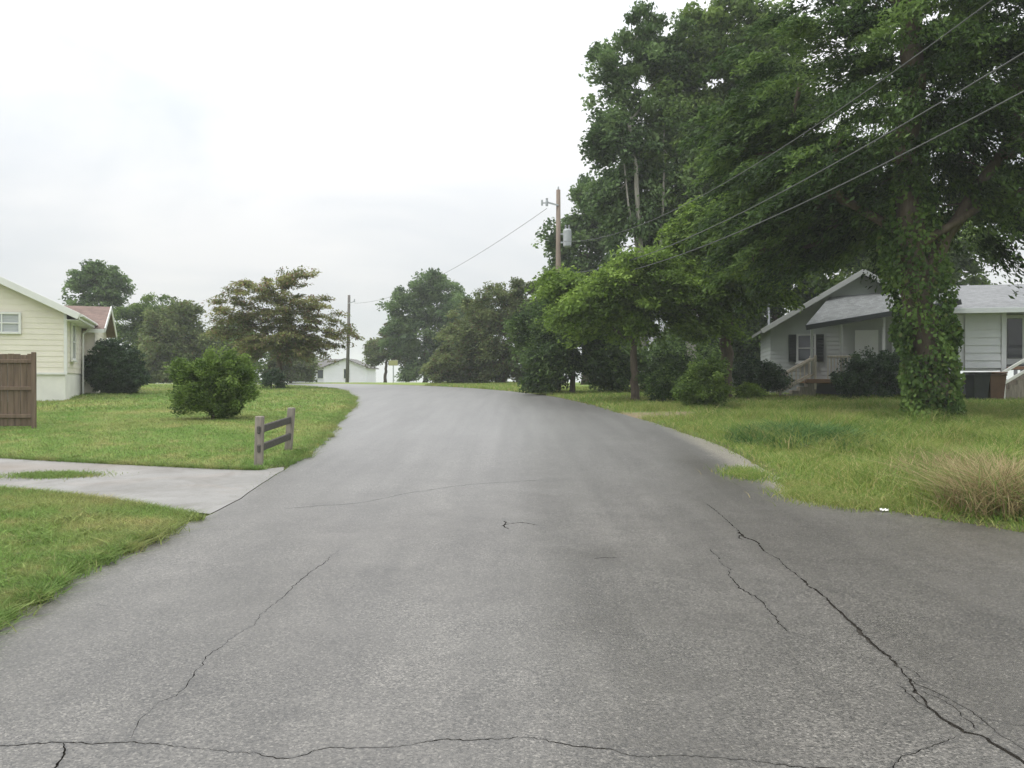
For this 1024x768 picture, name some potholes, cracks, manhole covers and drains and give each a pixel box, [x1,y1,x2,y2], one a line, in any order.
crack [0,507,1024,768]
